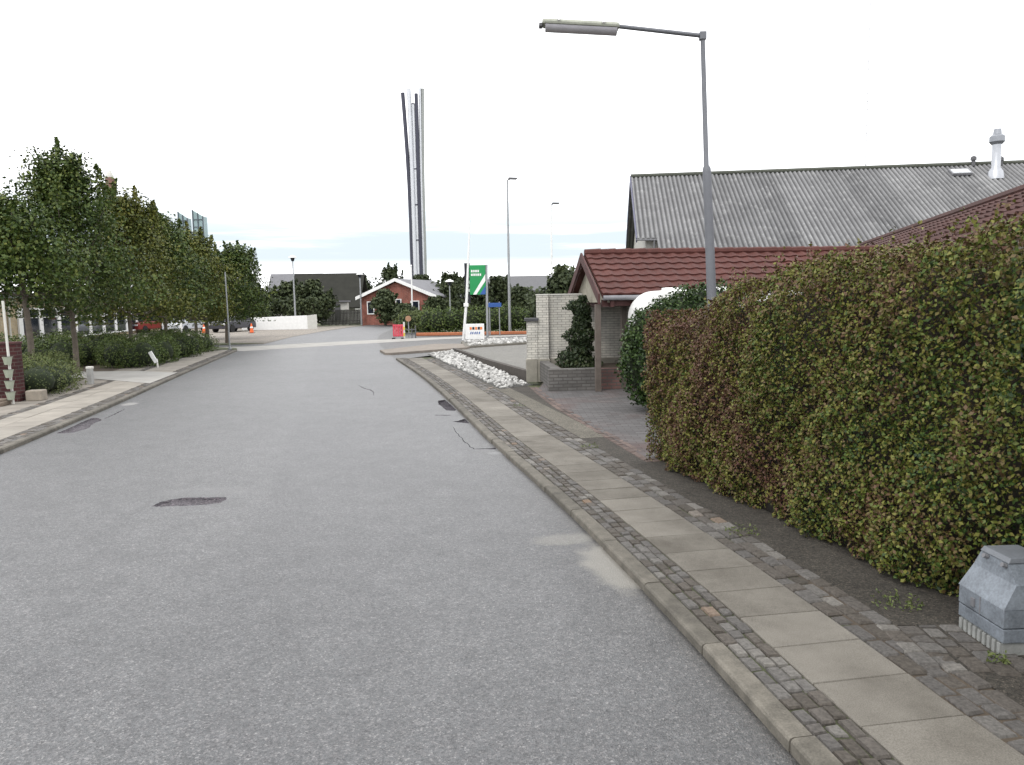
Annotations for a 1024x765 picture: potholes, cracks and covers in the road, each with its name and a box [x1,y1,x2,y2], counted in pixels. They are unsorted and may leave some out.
pothole [154,497,227,507]
pothole [438,400,456,411]
pothole [58,418,101,433]
